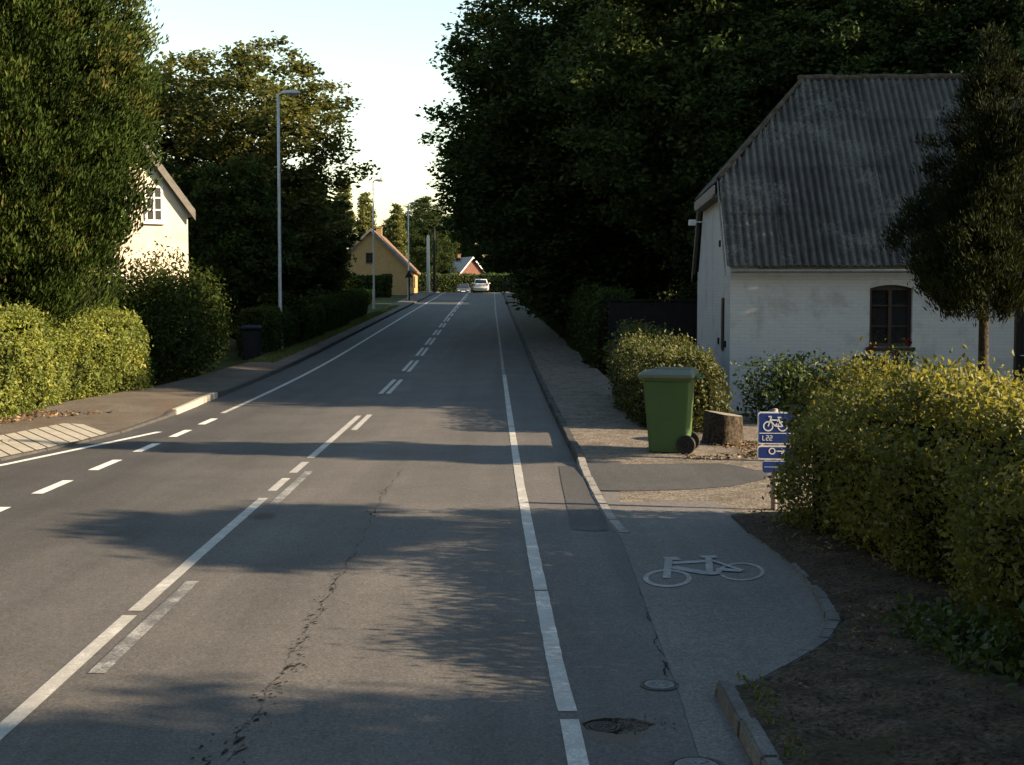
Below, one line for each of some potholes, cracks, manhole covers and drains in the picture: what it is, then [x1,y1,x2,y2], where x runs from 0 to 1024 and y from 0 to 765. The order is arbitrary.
pothole [582,716,676,735]
manhole cover [640,679,679,691]
manhole cover [668,756,725,765]
crack [191,471,400,765]
